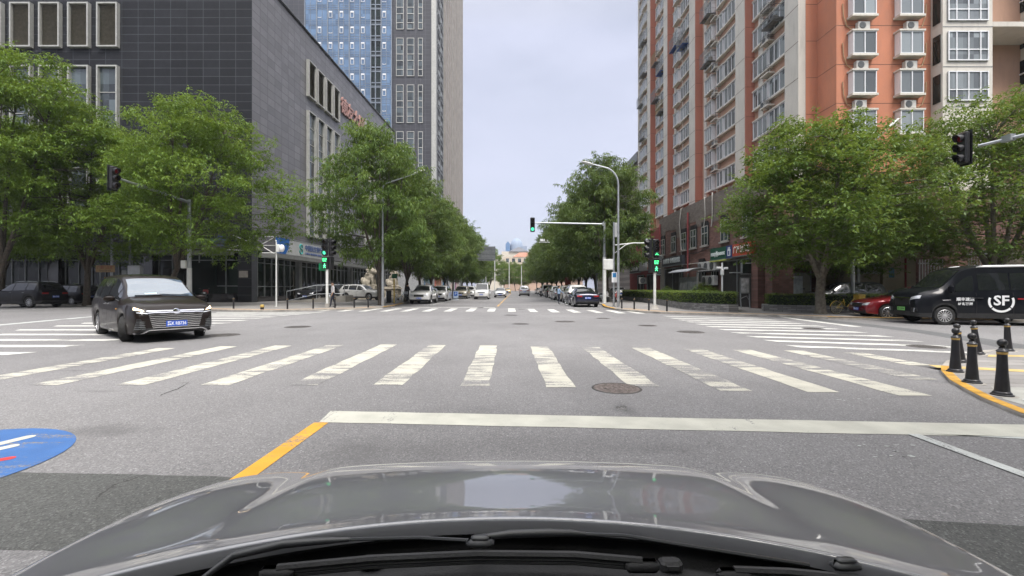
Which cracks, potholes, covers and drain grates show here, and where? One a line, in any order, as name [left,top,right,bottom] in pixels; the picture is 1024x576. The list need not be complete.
manhole cover [592,383,642,394]
crack [95,474,146,501]
